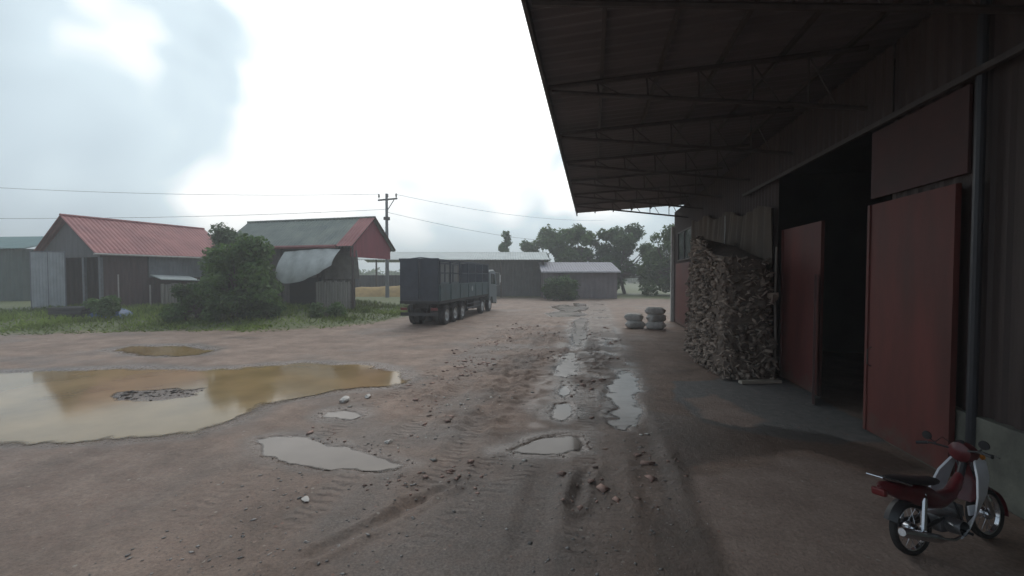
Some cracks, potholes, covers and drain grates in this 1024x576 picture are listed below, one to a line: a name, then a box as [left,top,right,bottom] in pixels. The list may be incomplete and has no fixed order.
pothole [544,402,581,422]
pothole [501,433,592,457]
pothole [253,434,413,472]
